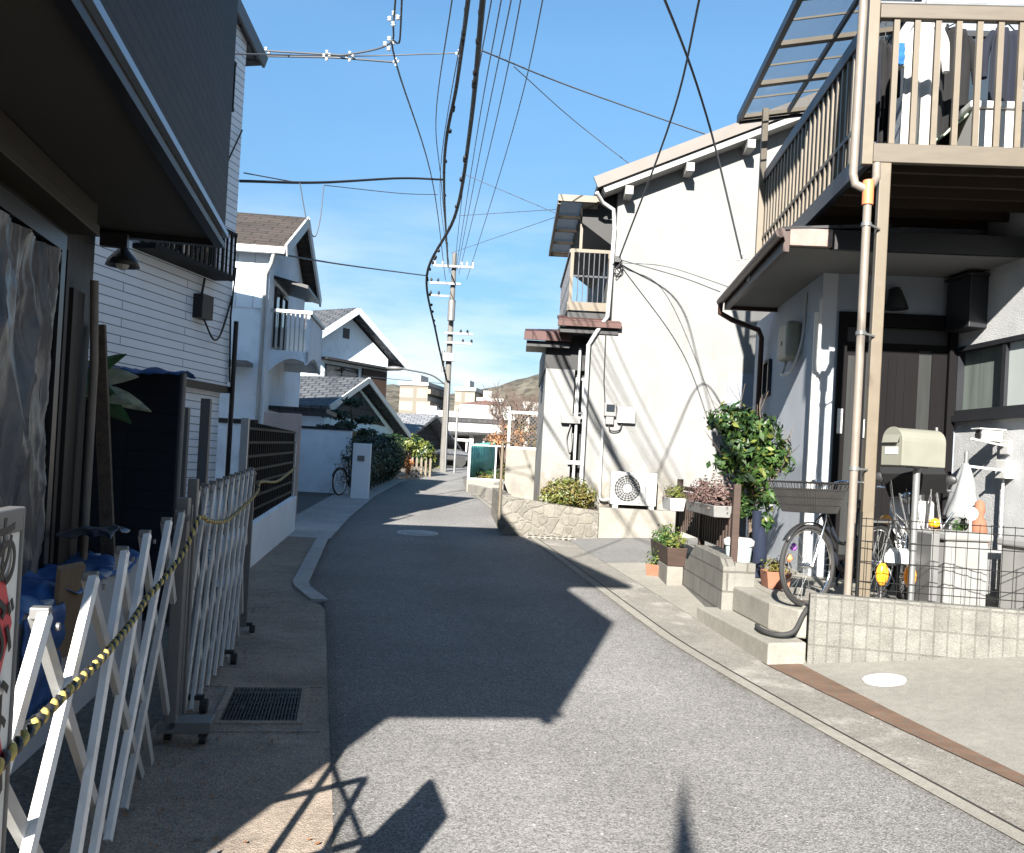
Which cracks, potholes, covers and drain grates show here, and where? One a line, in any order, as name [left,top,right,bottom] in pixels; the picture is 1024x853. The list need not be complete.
drain grate [214,685,309,725]
